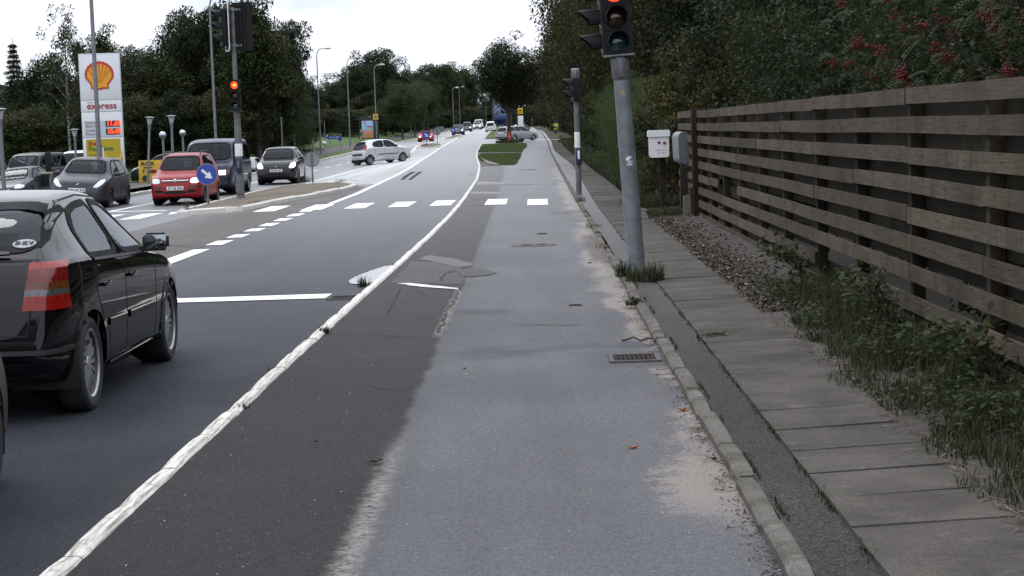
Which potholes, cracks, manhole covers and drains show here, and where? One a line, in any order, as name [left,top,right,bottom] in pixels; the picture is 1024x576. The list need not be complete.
drain grate [608,353,662,363]
